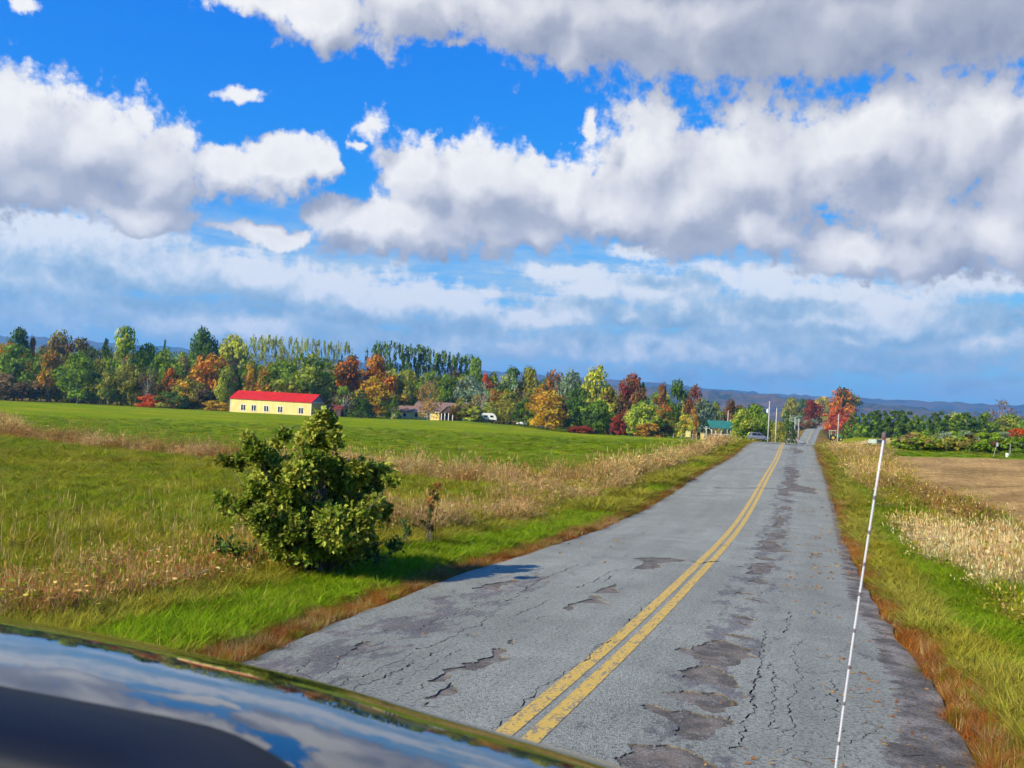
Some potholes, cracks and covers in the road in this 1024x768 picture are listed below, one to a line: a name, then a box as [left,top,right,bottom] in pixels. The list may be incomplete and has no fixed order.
pothole [639,704,735,741]
pothole [593,584,621,593]
pothole [427,648,515,682]
pothole [563,595,613,611]
pothole [678,665,743,689]
pothole [662,690,739,713]
pothole [632,557,687,569]
pothole [674,640,760,667]
crack [291,564,629,708]
crack [712,611,924,766]
pothole [422,682,460,700]
